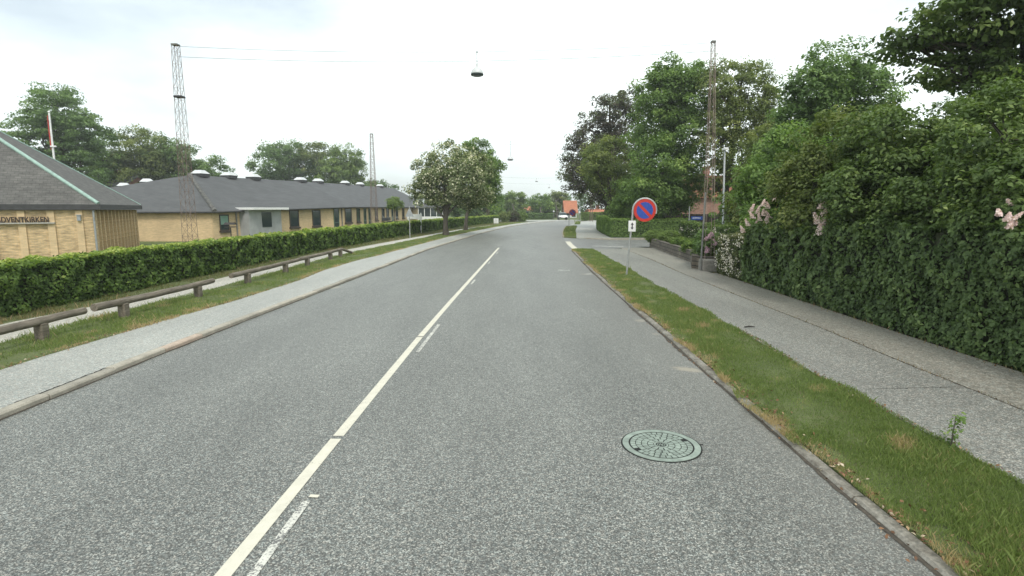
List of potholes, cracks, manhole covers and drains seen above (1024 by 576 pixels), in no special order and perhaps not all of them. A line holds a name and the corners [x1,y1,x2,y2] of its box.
manhole cover [621,429,703,463]
